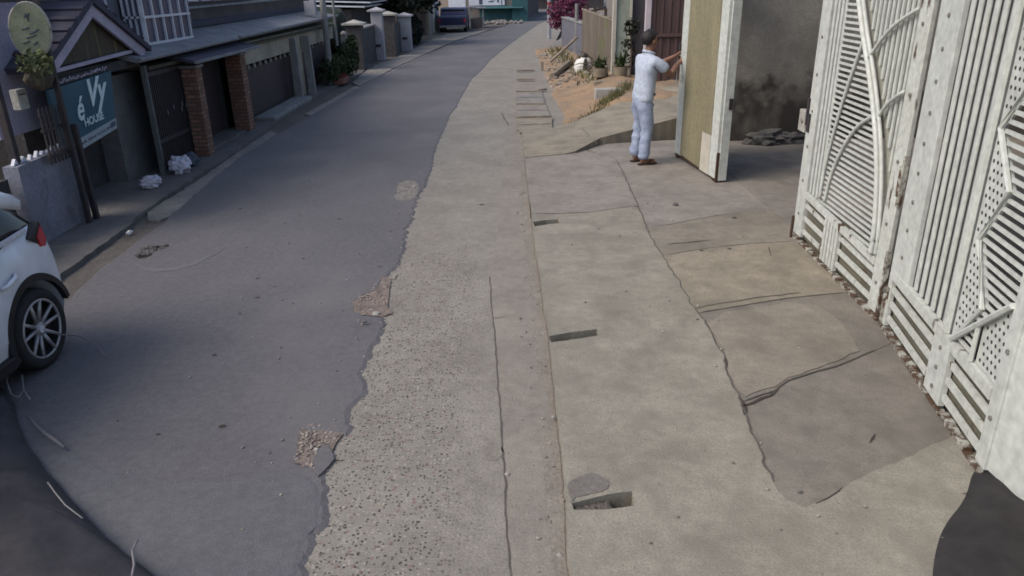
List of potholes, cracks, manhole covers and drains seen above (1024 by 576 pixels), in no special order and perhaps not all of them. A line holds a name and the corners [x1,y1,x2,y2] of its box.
pothole [350,277,392,317]
pothole [295,423,344,469]
crack [489,276,512,576]
crack [547,160,873,480]
